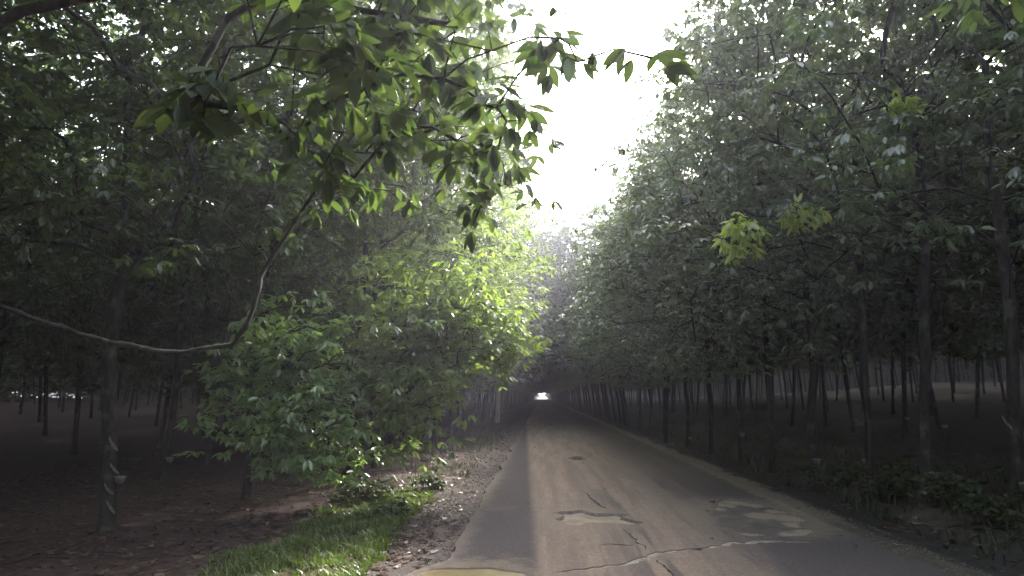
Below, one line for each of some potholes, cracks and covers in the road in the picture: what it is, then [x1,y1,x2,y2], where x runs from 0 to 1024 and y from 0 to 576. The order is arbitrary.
pothole [552,510,644,525]
crack [558,529,814,576]
